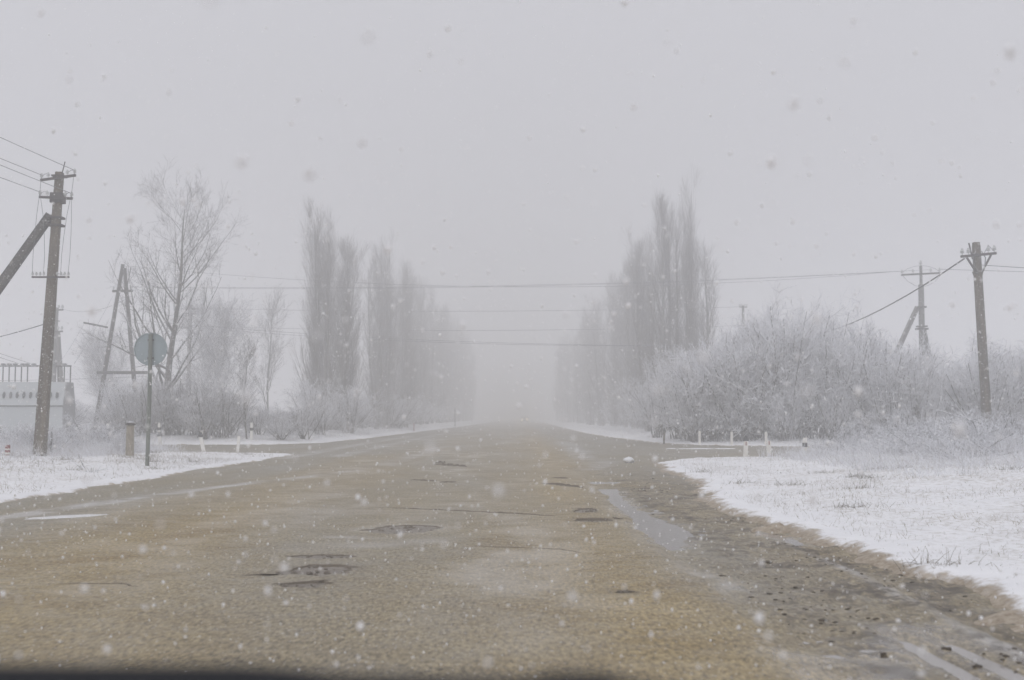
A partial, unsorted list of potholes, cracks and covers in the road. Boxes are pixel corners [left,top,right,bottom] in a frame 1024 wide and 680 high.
crack [412,461,467,481]
crack [379,507,565,517]
pothole [244,564,359,576]
pothole [278,580,333,588]
pothole [357,525,442,534]
